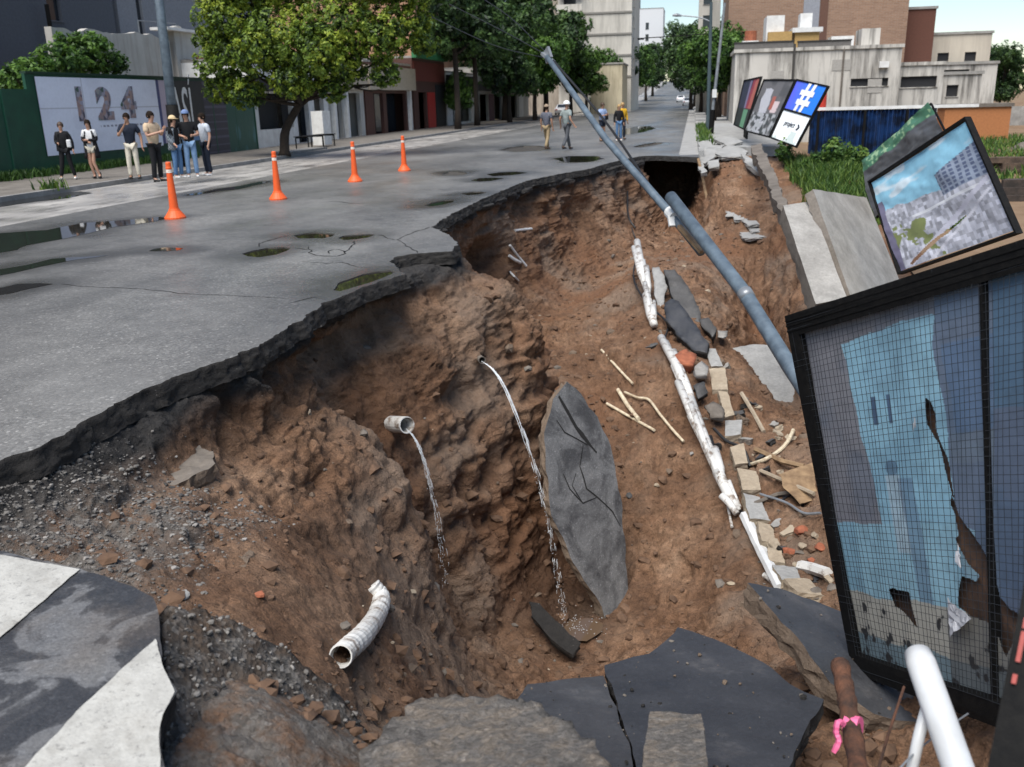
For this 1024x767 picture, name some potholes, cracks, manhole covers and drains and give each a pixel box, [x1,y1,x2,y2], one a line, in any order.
pothole [334,270,393,291]
crack [66,284,273,298]
crack [258,236,357,267]
pothole [243,247,290,257]
